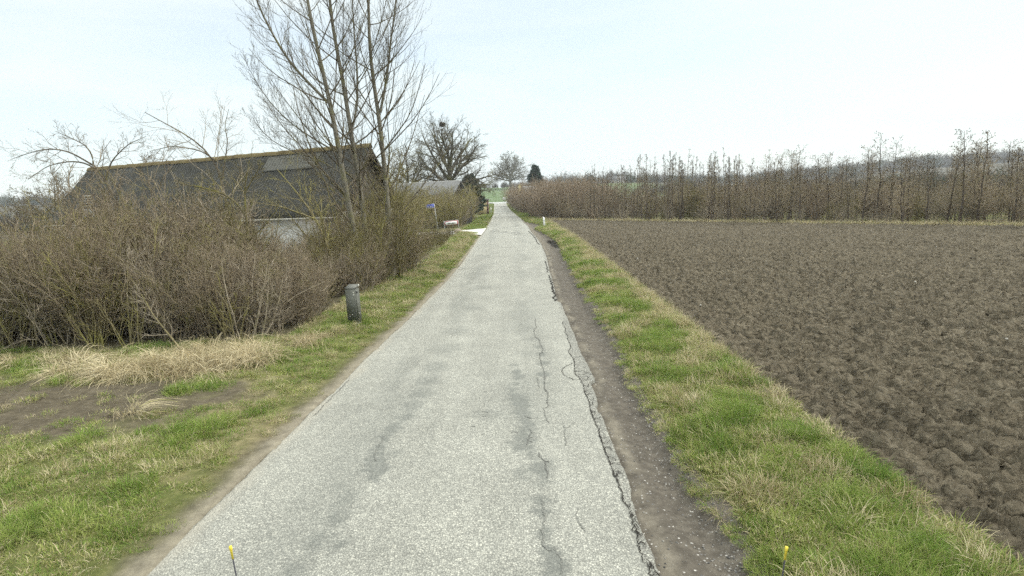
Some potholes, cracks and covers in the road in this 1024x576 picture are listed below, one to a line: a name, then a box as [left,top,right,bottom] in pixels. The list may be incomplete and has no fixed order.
crack [513,318,660,576]
